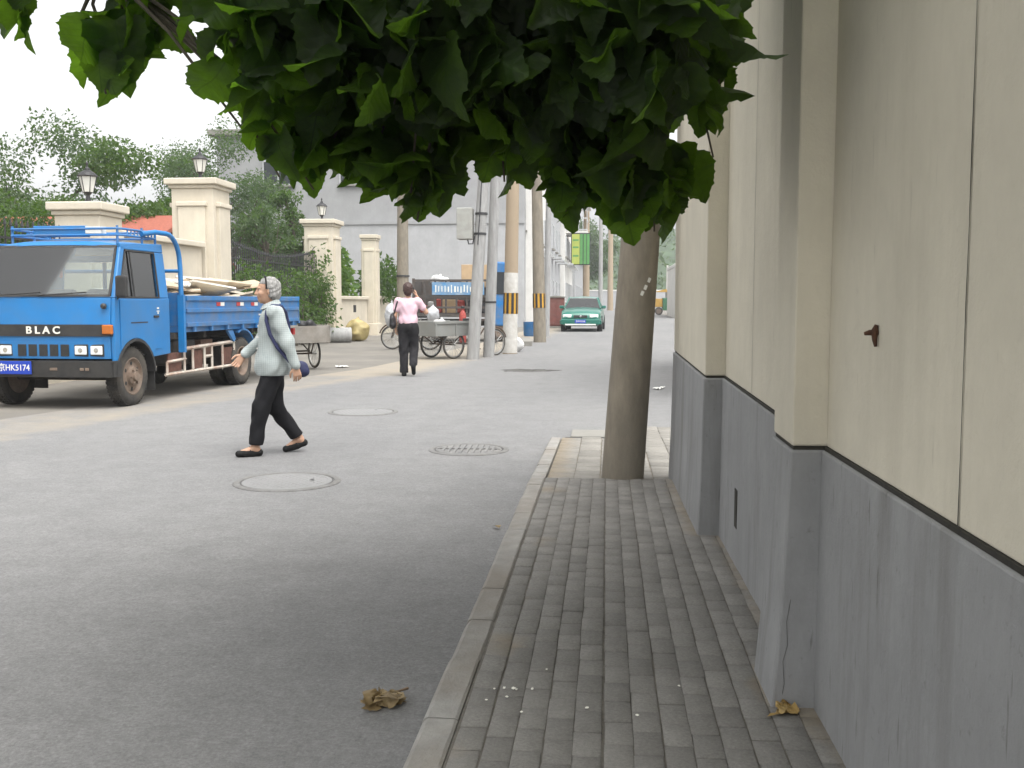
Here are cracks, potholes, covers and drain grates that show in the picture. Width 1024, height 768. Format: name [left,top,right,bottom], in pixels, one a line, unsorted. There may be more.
manhole cover [232,472,341,492]
manhole cover [328,408,398,416]
